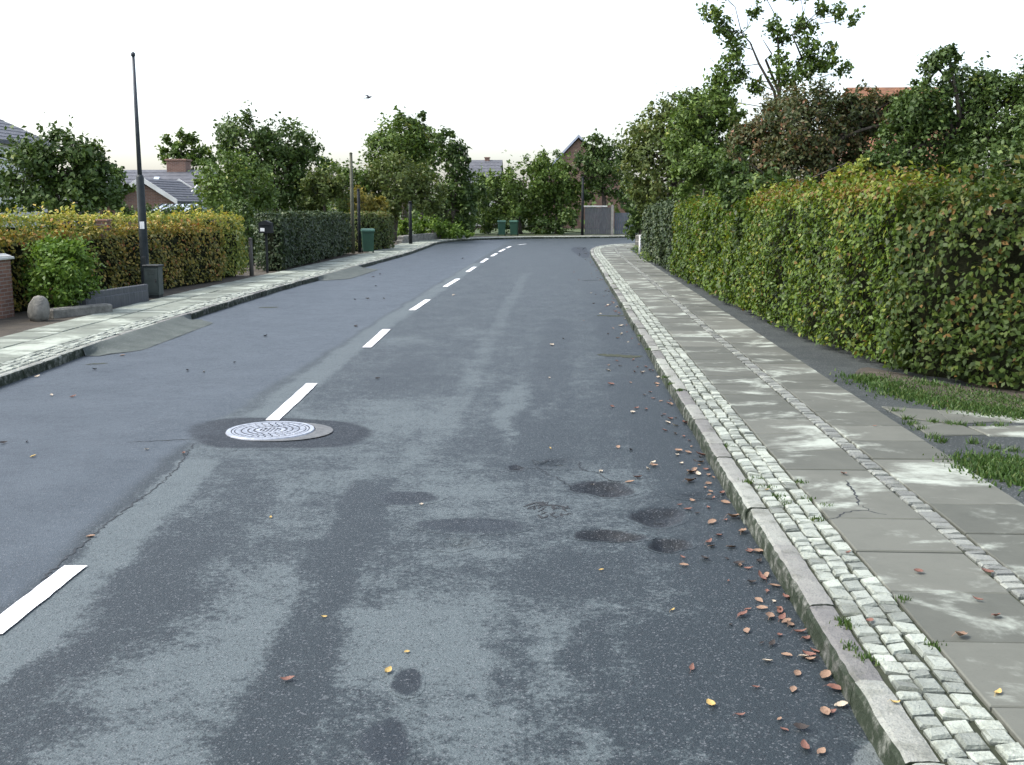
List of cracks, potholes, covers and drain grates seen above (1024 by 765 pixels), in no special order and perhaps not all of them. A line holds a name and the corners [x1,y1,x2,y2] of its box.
pothole [506,464,527,472]
pothole [568,528,656,543]
pothole [622,505,691,529]
manhole cover [225,421,333,441]
crack [827,480,887,520]
crack [523,459,616,518]
pothole [563,479,641,499]
pothole [643,537,697,554]
